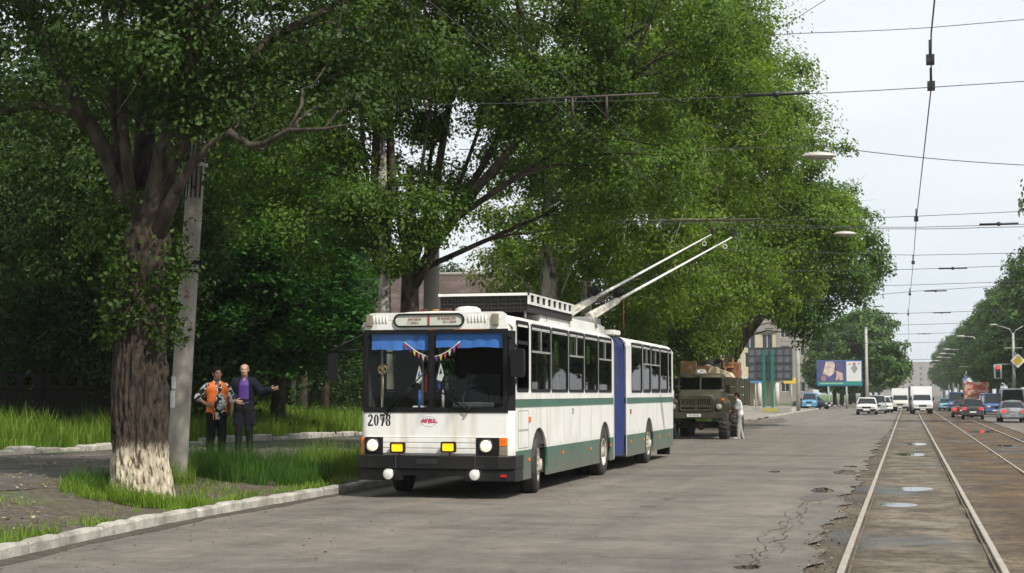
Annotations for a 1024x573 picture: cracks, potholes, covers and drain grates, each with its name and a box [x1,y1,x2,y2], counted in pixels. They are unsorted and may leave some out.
crack [733,502,812,567]
